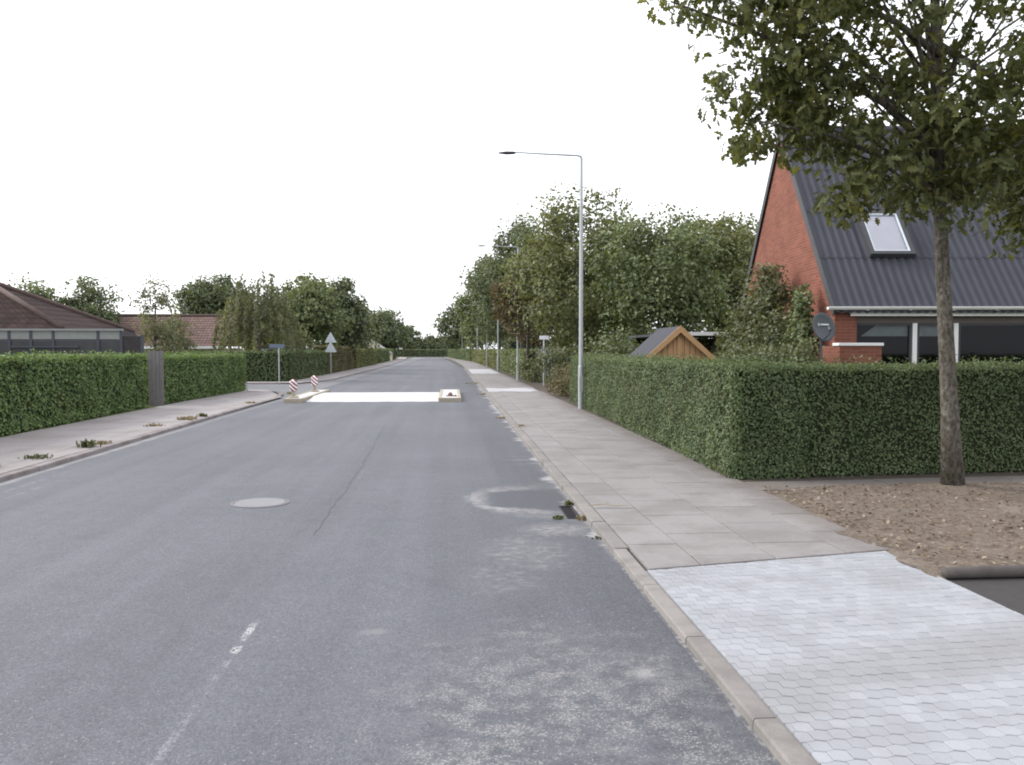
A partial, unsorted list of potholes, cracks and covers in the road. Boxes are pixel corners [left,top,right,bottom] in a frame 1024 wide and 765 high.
manhole cover [230,498,290,508]
drain grate [558,506,580,519]
